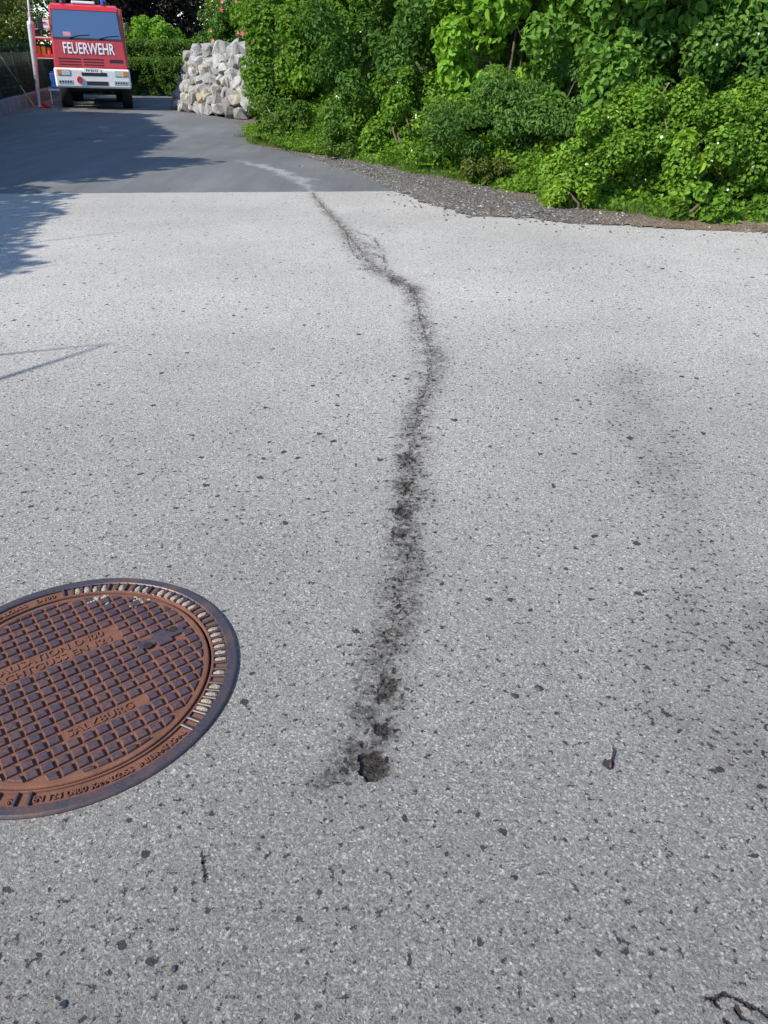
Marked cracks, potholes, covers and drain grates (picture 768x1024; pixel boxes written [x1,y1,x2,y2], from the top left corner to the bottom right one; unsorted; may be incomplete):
manhole cover [0,578,238,820]
crack [694,987,768,1024]
pothole [357,751,389,782]
crack [307,192,452,801]
